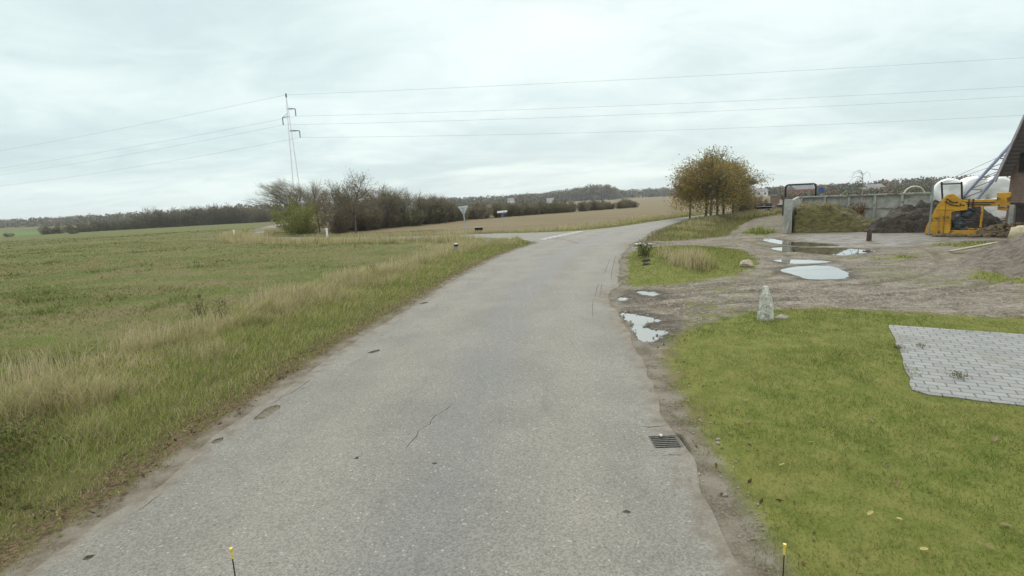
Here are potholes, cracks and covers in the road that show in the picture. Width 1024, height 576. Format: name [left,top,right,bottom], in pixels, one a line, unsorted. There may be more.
drain grate [649,436,683,448]
pothole [253,405,280,420]
